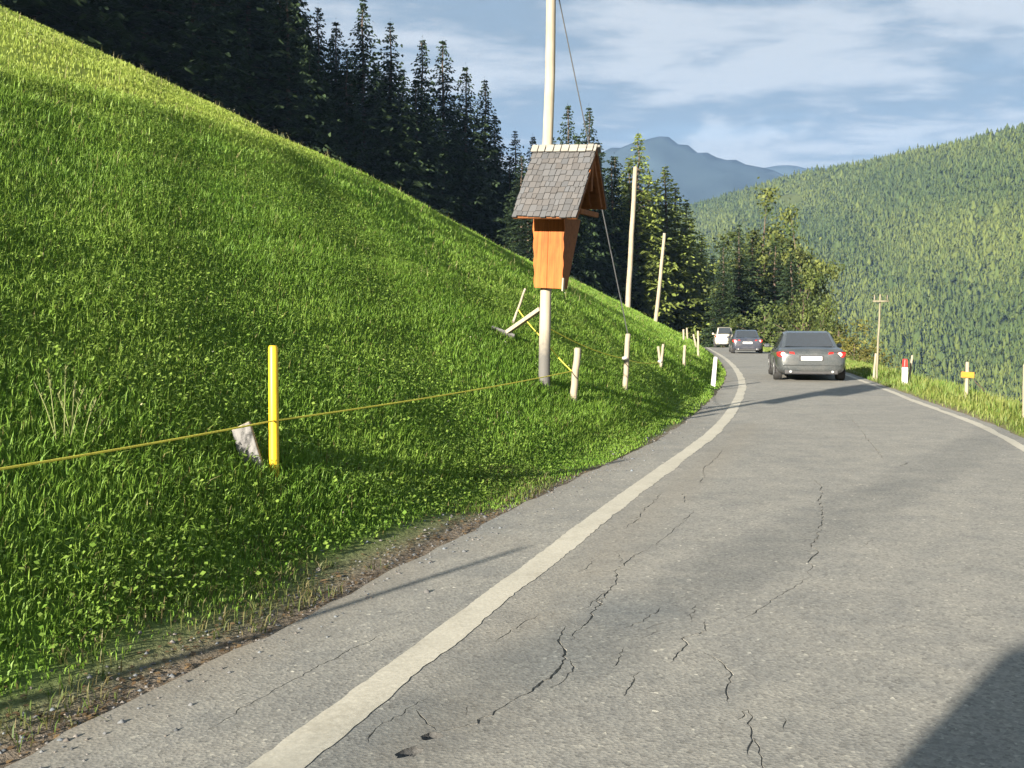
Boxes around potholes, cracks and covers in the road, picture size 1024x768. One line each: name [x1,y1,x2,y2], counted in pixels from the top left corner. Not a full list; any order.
crack [368,453,720,742]
crack [219,637,376,724]
crack [745,482,824,618]
crack [707,654,764,768]
